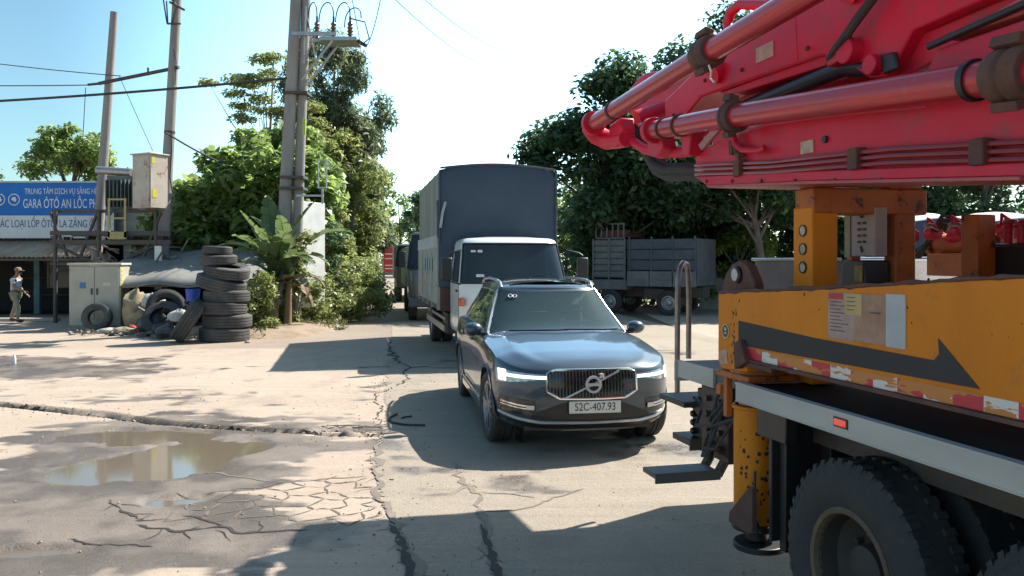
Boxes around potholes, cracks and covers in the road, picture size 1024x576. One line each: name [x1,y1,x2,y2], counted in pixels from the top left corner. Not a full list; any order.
crack [73,472,382,546]
crack [443,463,584,576]
crack [0,340,437,437]
